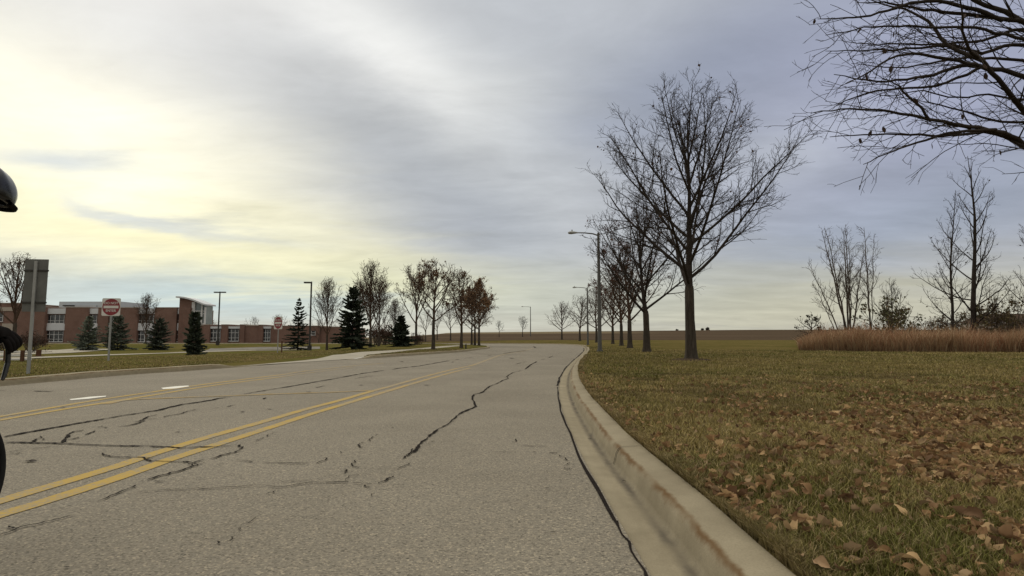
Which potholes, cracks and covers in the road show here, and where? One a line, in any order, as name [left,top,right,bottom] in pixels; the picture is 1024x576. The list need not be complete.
crack [7,346,648,576]
